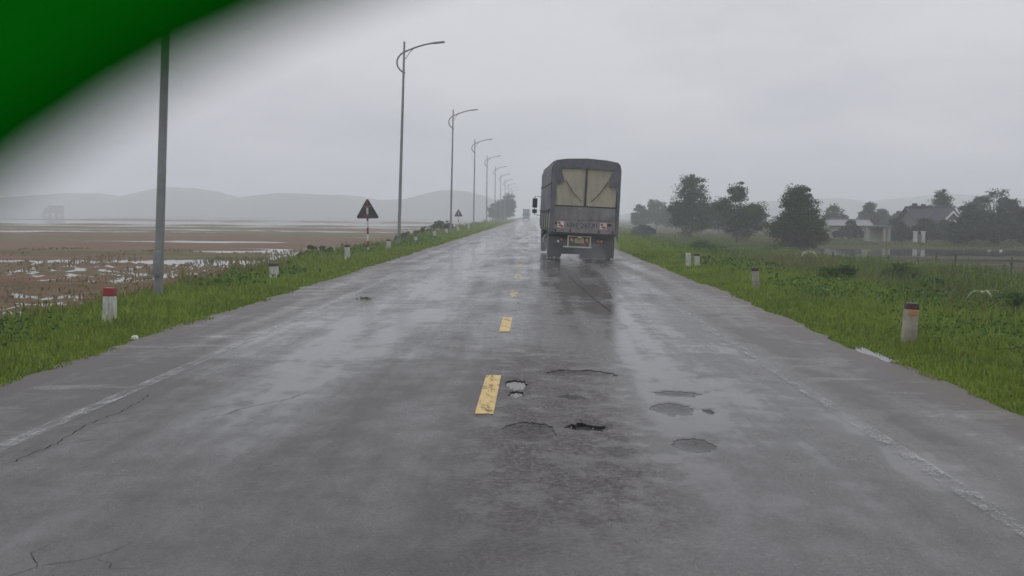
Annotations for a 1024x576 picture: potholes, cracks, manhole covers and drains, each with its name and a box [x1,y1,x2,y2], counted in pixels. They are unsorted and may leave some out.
crack [10,542,134,576]
pothole [671,438,717,453]
pothole [502,422,557,442]
pothole [547,370,617,379]
crack [3,395,149,465]
pothole [649,403,694,416]
pothole [564,423,609,431]
pothole [505,380,528,390]
